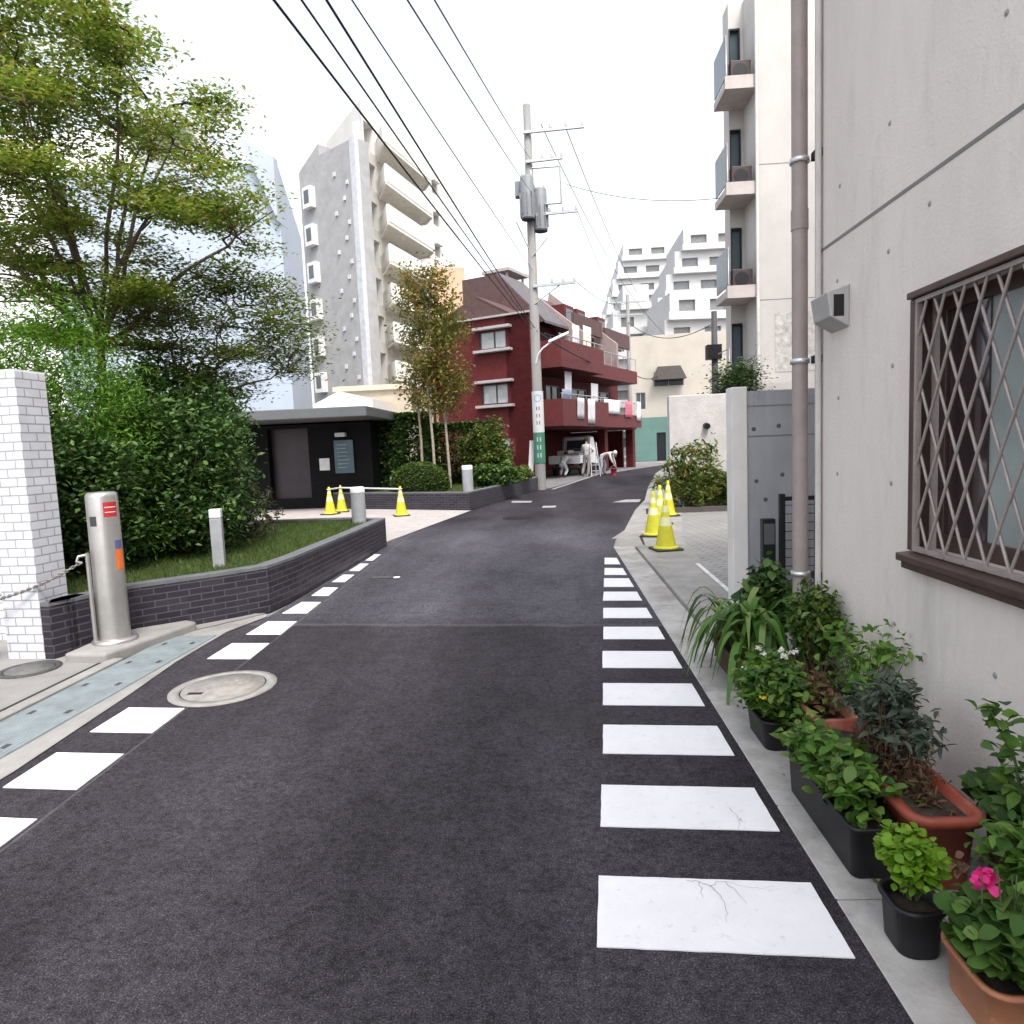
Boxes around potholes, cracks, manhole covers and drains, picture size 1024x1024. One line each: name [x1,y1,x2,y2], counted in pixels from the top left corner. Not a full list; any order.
crack [686,880,775,923]
manhole cover [0,660,63,679]
manhole cover [167,670,277,707]
